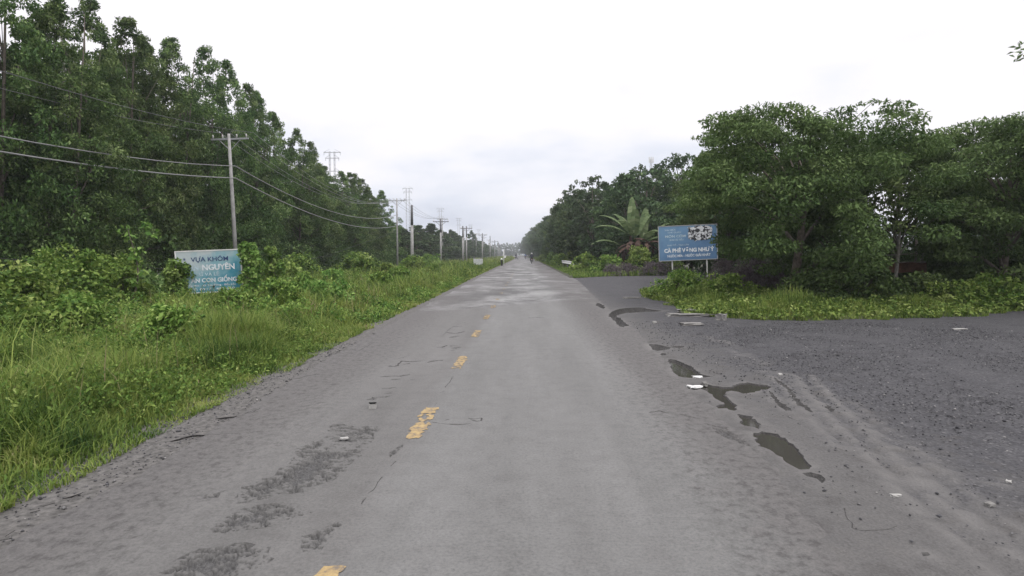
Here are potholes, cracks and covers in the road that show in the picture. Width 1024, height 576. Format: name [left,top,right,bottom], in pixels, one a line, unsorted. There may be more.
crack [159,408,408,576]
pothole [737,414,761,429]
pothole [667,359,714,378]
pothole [803,472,826,483]
crack [367,322,483,425]
crack [844,509,897,531]
pothole [753,431,812,470]
pothole [608,308,660,327]
pothole [687,382,771,411]
